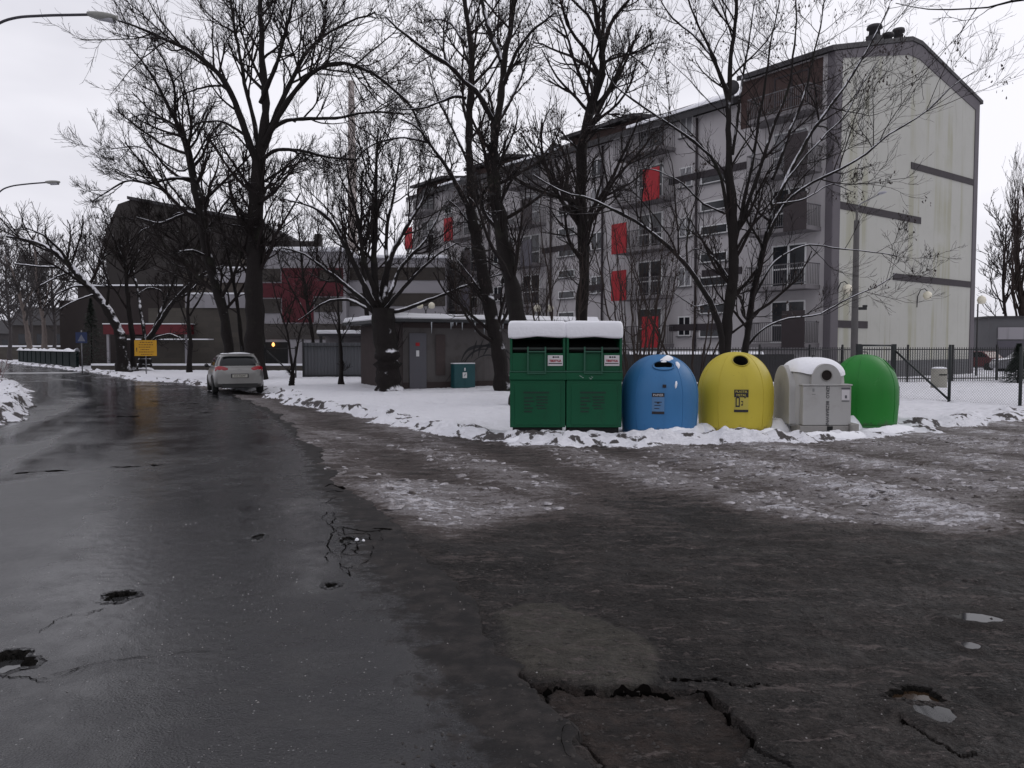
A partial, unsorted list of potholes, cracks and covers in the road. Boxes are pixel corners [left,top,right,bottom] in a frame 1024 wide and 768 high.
pothole [243,533,270,541]
pothole [877,682,961,707]
crack [322,497,391,575]
crack [538,677,761,749]
pothole [318,582,345,590]
pothole [95,589,145,605]
pothole [0,647,48,678]
